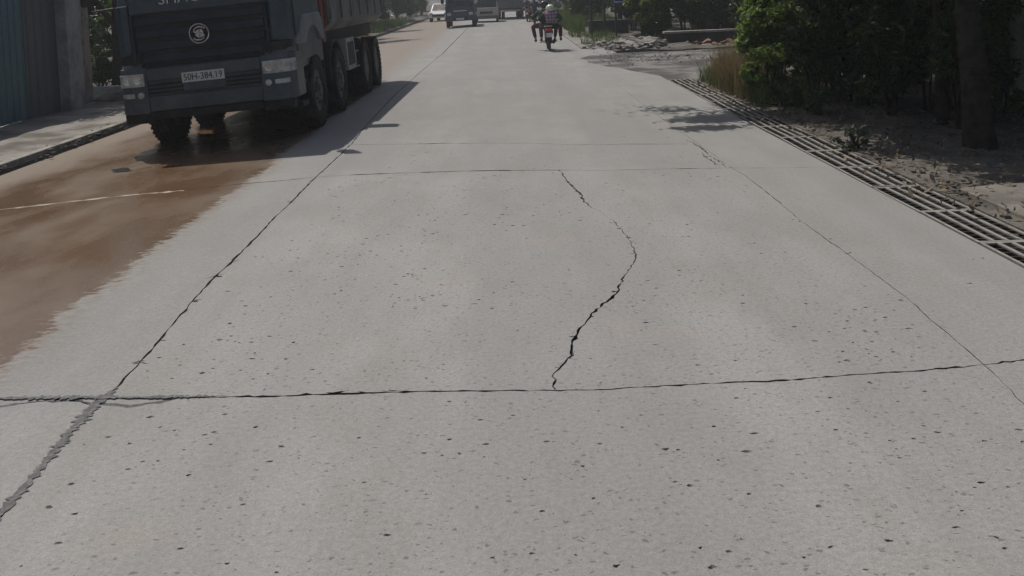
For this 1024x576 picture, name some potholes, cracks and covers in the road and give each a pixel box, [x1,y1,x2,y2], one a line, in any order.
drain grate [873,185,971,212]
drain grate [759,125,815,138]
drain grate [805,149,879,168]
drain grate [980,241,1024,267]
crack [552,173,637,390]
drain grate [836,166,919,188]
drain grate [723,107,769,118]
drain grate [709,100,750,110]
drain grate [780,136,842,152]
drain grate [920,209,1024,244]
drain grate [741,116,791,127]
